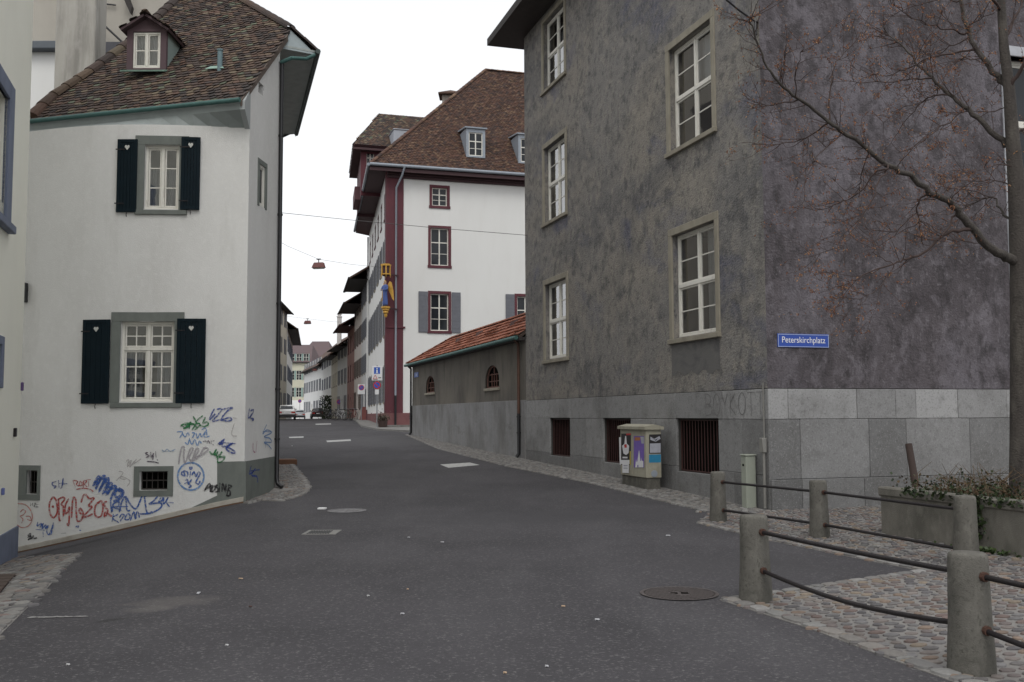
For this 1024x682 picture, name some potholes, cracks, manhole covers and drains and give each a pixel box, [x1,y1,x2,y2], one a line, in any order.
manhole cover [640,586,719,600]
